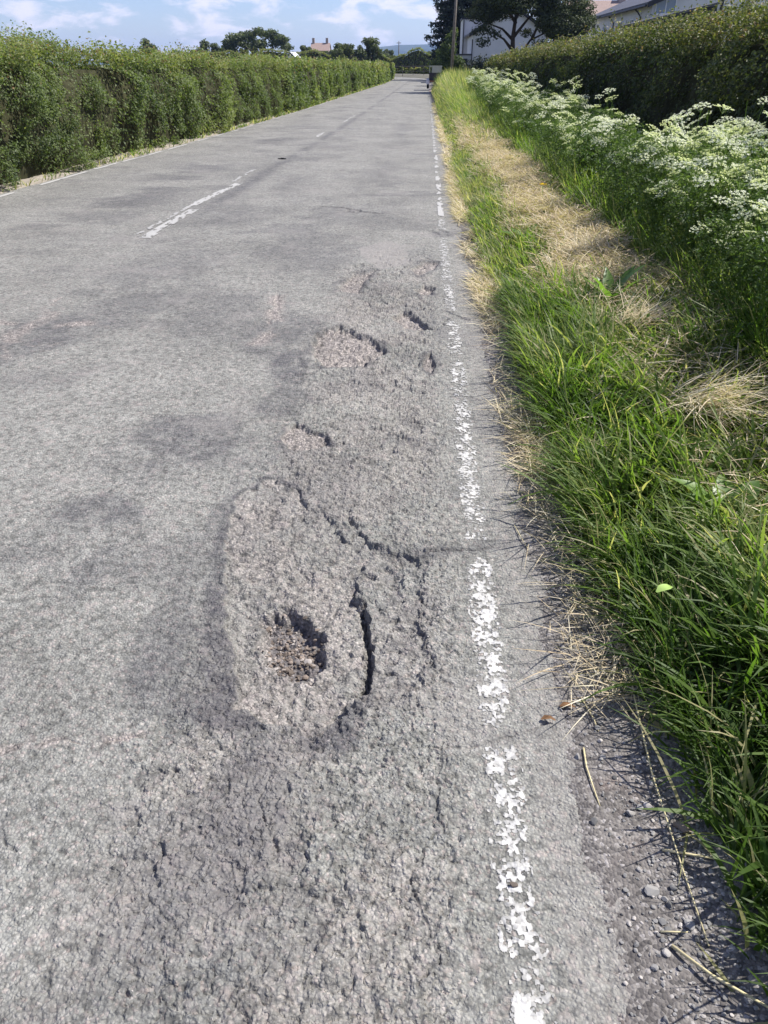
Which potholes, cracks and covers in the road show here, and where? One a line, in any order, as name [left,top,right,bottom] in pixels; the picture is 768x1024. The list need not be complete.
pothole [306,325,389,369]
crack [406,879,443,965]
crack [255,739,314,855]
pothole [218,476,431,740]
pothole [275,421,334,452]
pothole [389,307,434,333]
